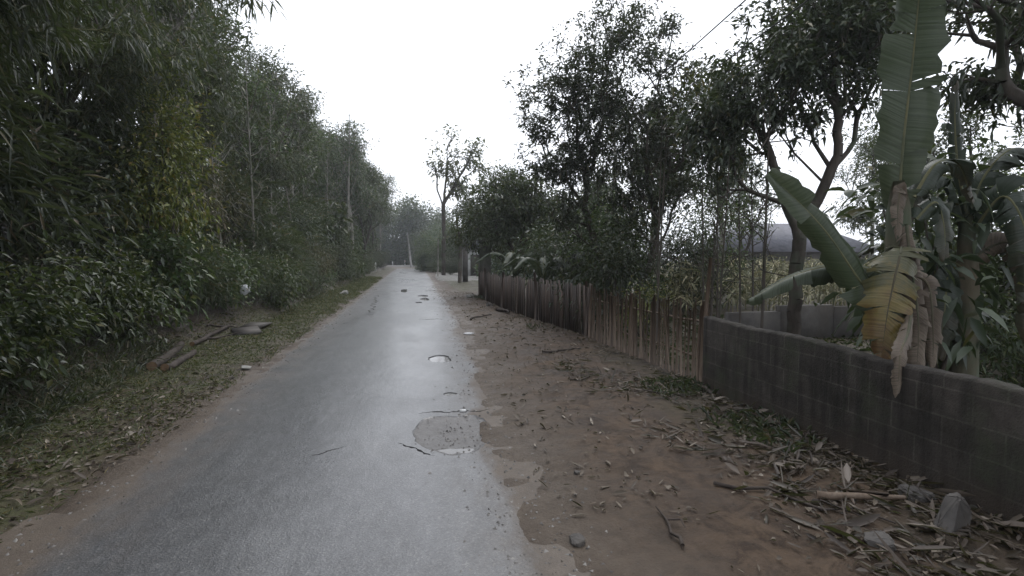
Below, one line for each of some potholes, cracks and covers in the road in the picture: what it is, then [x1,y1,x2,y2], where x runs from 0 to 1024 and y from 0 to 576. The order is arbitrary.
pothole [428,355,451,363]
pothole [412,415,491,456]
